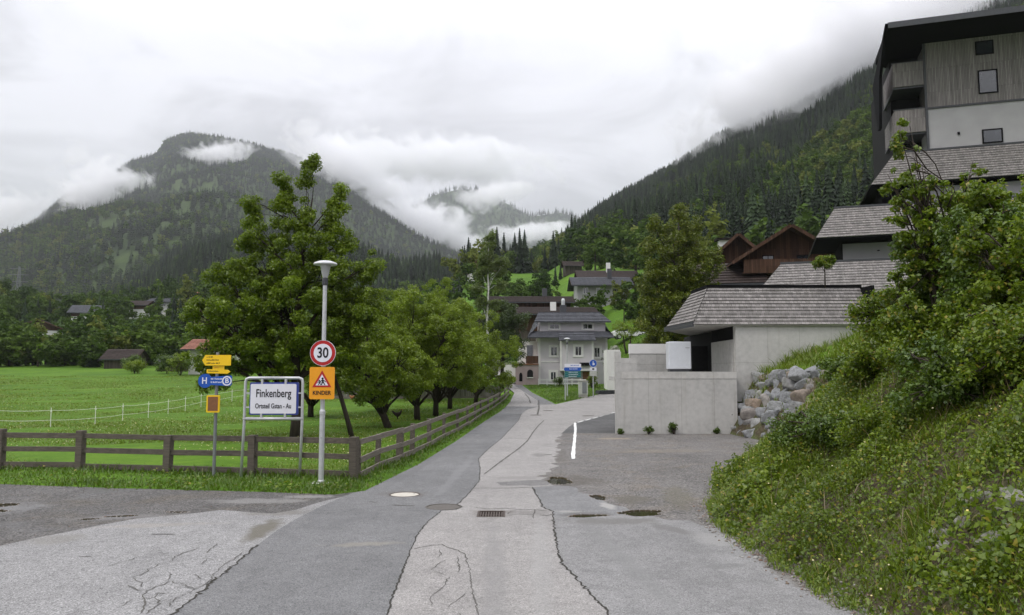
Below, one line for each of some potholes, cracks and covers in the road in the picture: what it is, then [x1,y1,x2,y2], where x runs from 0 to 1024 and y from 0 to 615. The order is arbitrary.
crack [414,544,479,615]
pothole [616,509,664,517]
crack [109,543,241,614]
pothole [547,476,573,485]
